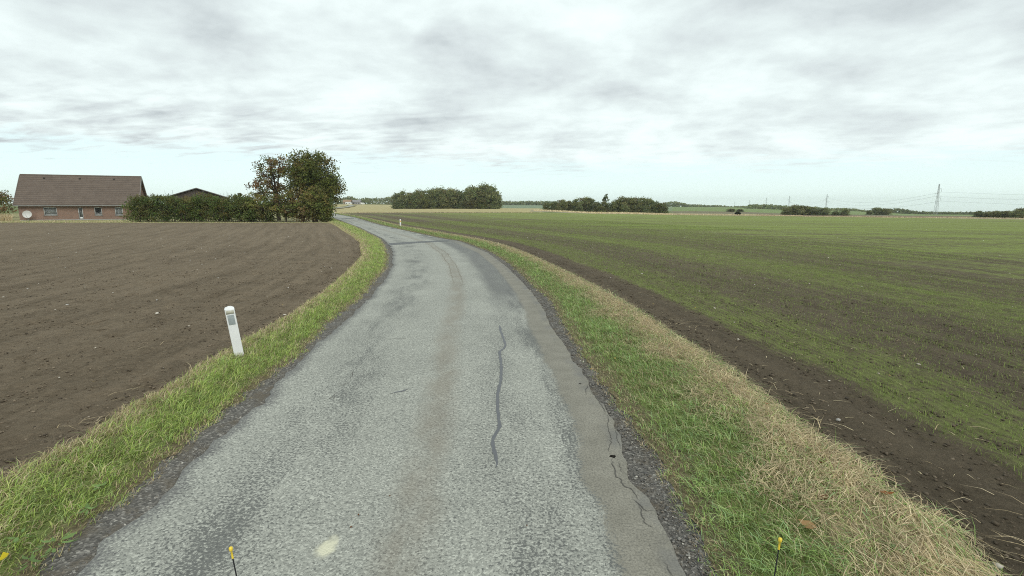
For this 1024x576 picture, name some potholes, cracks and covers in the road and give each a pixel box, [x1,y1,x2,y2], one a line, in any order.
crack [587,386,672,574]
